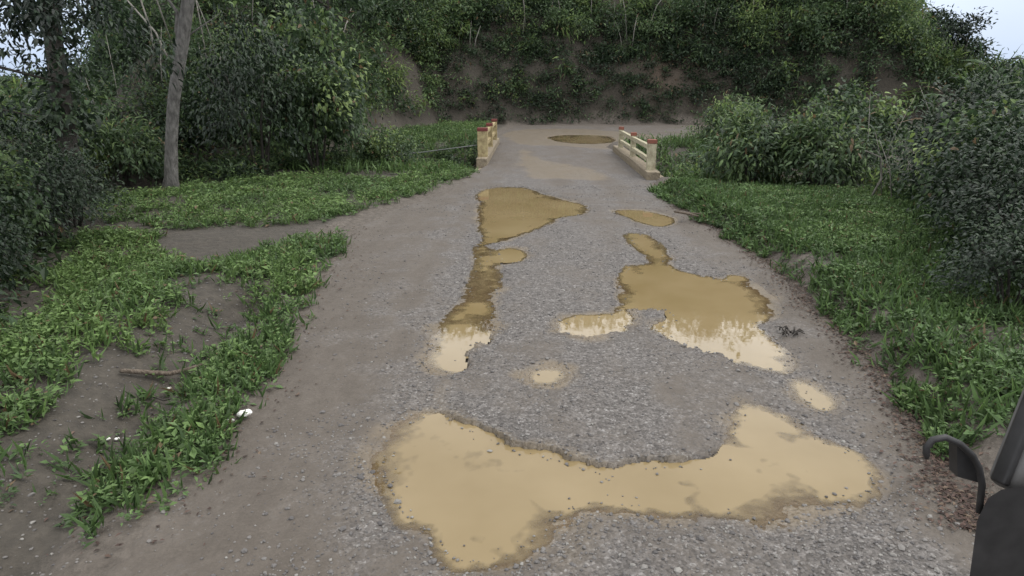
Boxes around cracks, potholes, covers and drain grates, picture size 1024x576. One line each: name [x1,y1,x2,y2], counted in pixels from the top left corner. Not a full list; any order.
pothole [368,403,892,575]
pothole [520,363,574,389]
pothole [782,378,849,415]
pothole [492,247,531,265]
pothole [475,187,590,245]
pothole [550,306,640,339]
pothole [422,244,504,376]
pothole [616,233,797,375]
pothole [612,209,678,227]
pothole [547,135,616,144]
